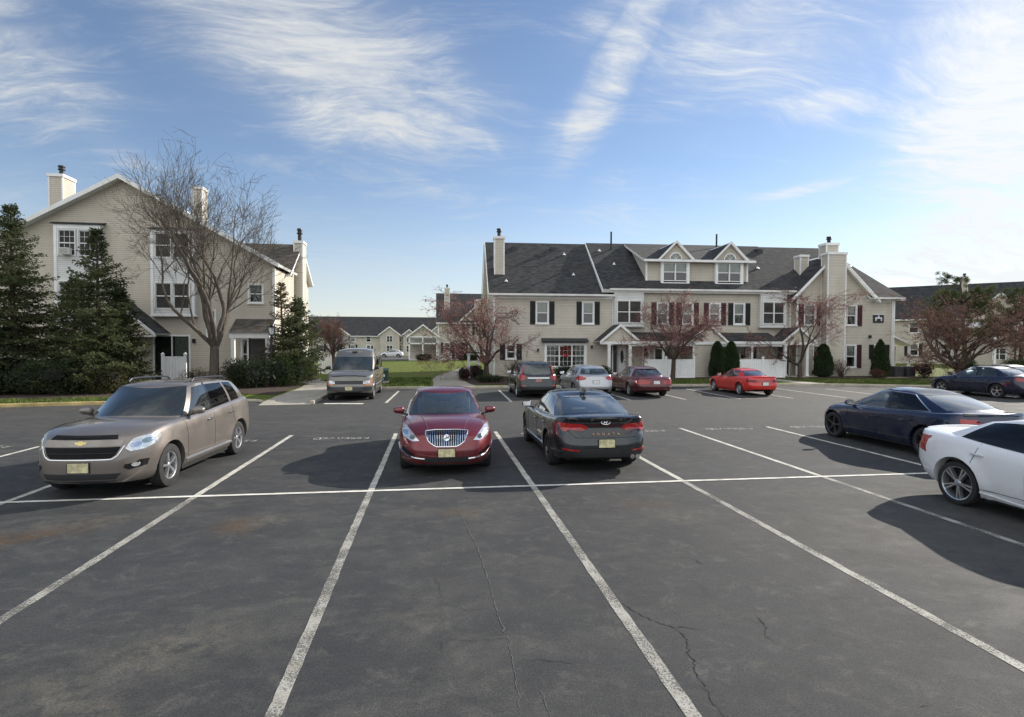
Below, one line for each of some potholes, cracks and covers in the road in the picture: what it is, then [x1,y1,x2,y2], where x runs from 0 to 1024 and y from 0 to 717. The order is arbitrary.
crack [577,582,725,717]
